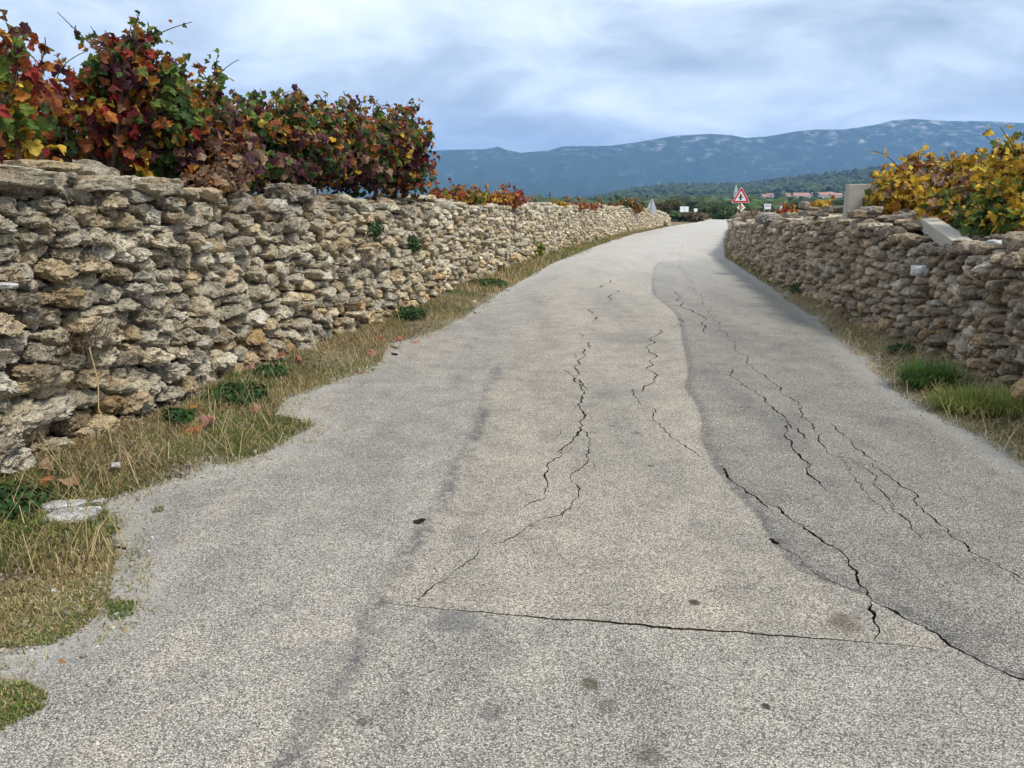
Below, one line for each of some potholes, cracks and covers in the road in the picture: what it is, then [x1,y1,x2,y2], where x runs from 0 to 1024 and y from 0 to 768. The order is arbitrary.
crack [632,244,1024,680]
crack [418,333,595,600]
